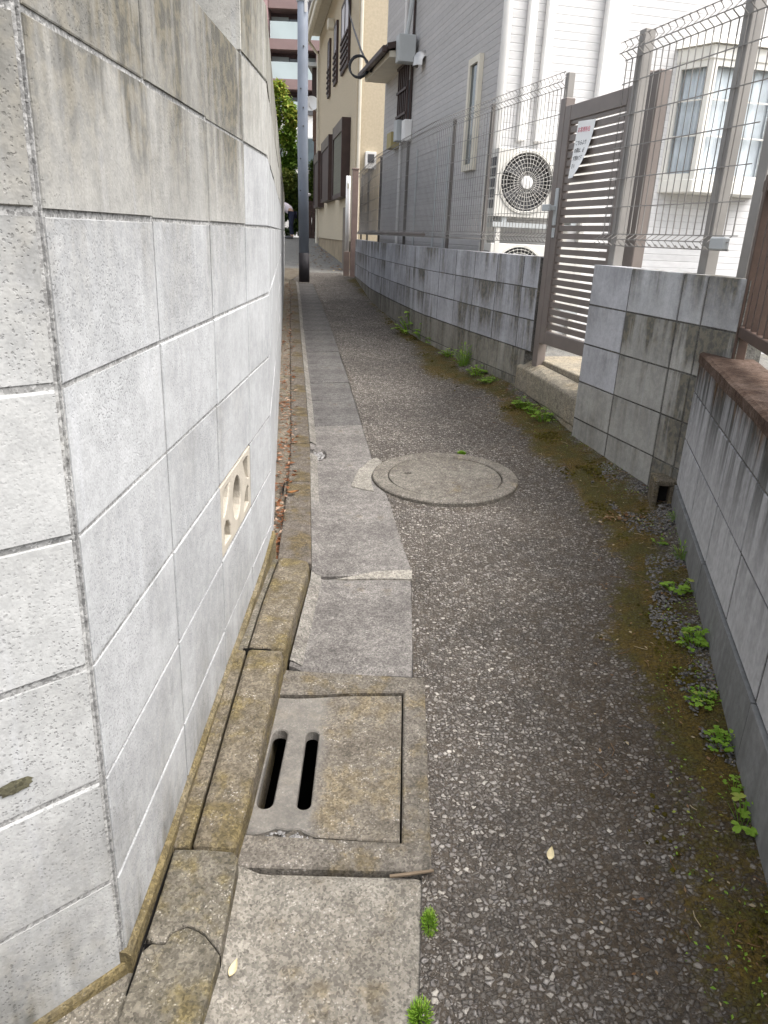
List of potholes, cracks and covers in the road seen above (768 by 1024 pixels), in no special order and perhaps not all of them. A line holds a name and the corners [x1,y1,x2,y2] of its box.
manhole cover [372,453,518,507]
crack [126,852,221,996]
